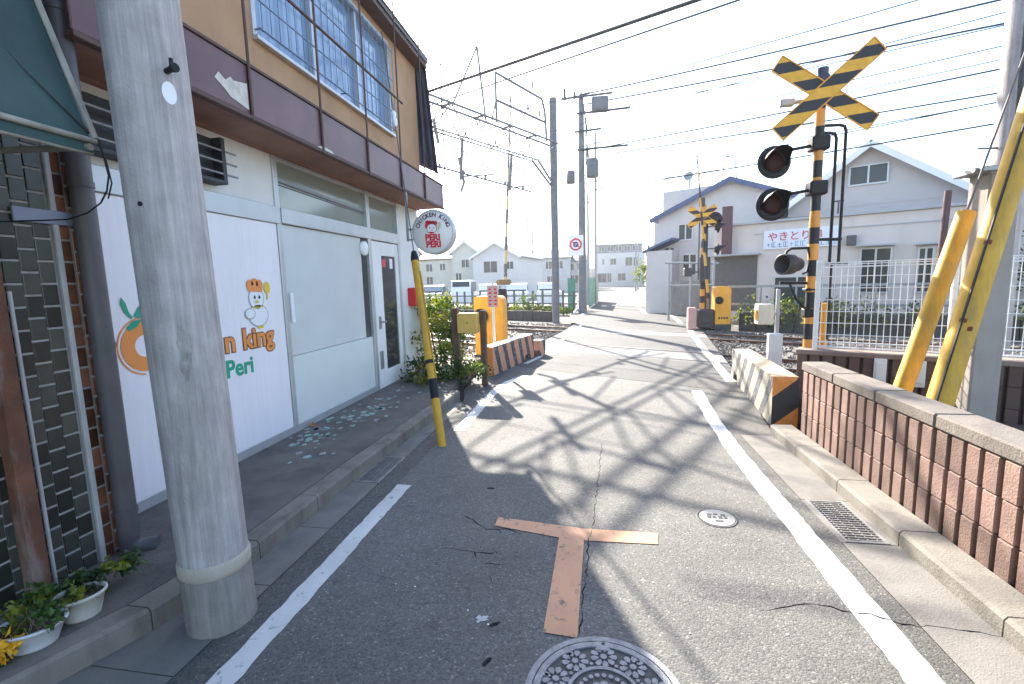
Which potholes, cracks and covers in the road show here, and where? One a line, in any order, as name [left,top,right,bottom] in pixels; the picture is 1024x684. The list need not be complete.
crack [767,603,1002,637]
drain grate [354,456,406,483]
drain grate [805,499,891,546]
manhole cover [696,508,738,528]
crack [449,515,520,581]
crack [579,445,602,634]
manhole cover [525,636,680,684]
